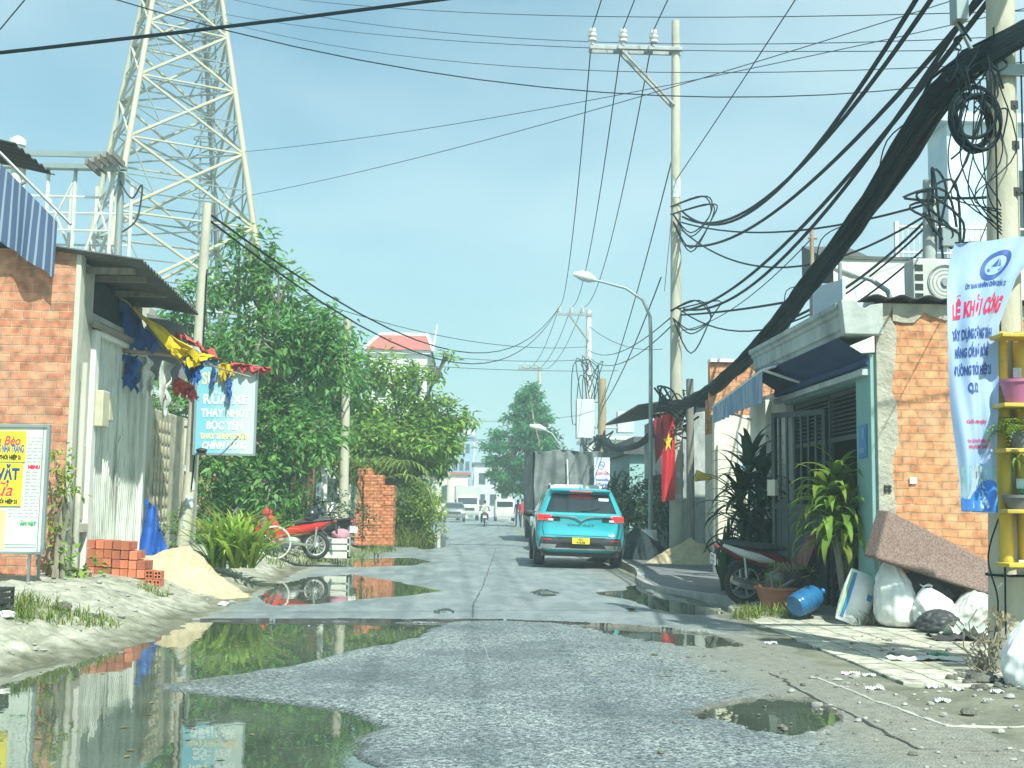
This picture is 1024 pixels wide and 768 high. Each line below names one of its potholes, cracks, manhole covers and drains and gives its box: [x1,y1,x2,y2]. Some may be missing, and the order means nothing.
crack [471,548,513,730]
pothole [576,623,746,648]
crack [770,673,1024,751]
pothole [684,696,844,736]
